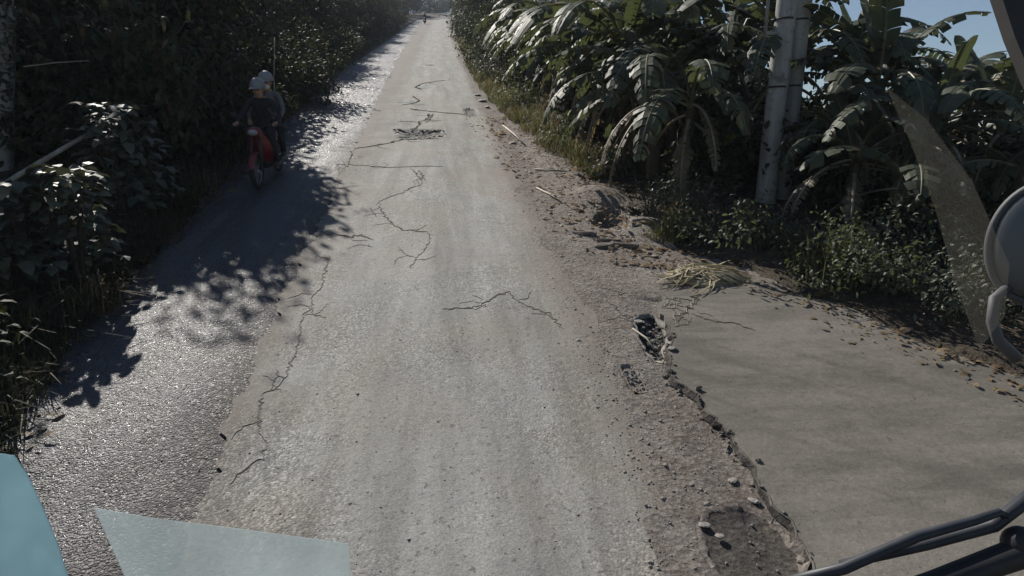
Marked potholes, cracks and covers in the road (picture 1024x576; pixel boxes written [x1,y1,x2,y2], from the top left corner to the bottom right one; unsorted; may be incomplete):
crack [442,291,562,328]
pothole [696,502,812,576]
crack [230,64,465,483]
crack [660,287,815,570]
pothole [618,362,648,394]
pothole [392,129,447,140]
pothole [633,313,669,364]
